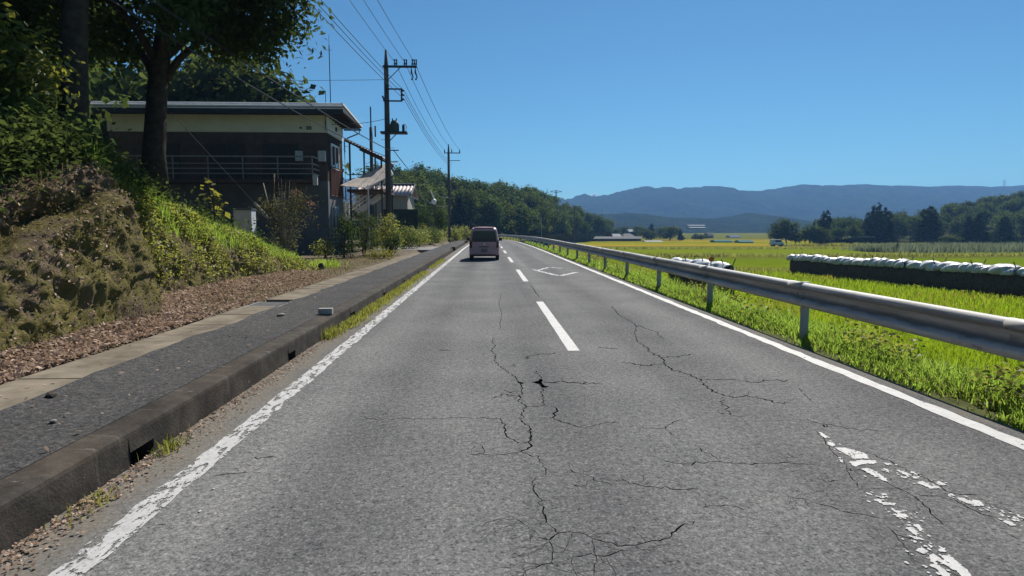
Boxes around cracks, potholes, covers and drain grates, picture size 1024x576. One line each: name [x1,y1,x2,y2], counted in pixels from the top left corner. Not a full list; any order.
crack [570,420,801,519]
crack [359,338,695,576]
crack [599,306,811,417]
